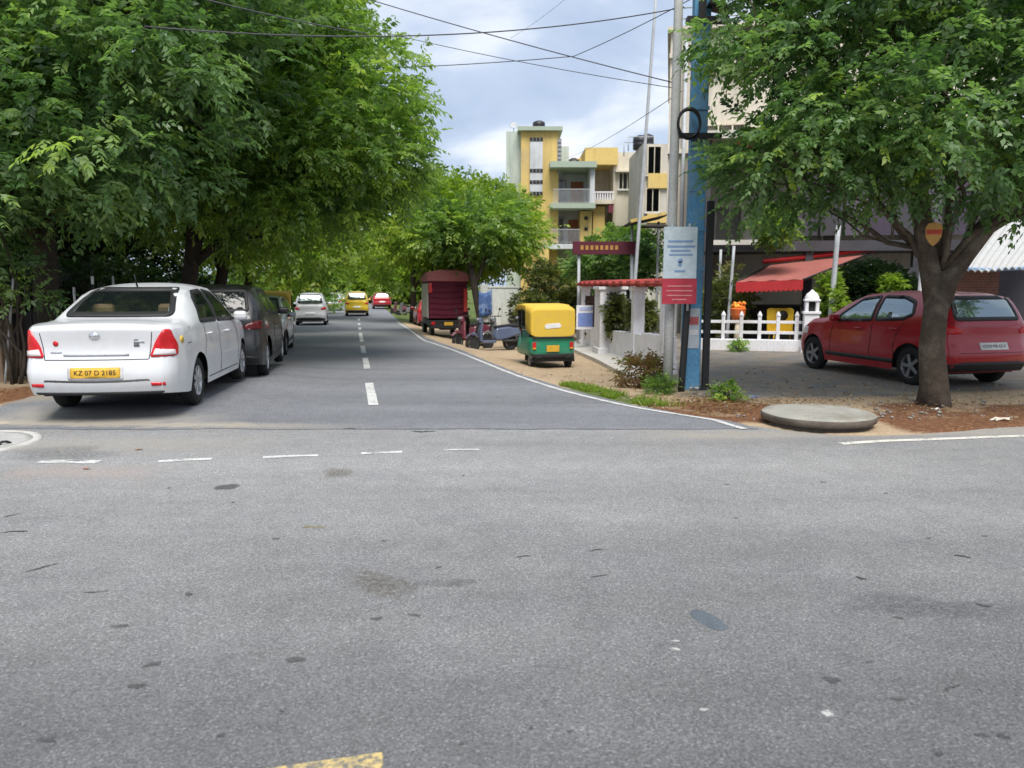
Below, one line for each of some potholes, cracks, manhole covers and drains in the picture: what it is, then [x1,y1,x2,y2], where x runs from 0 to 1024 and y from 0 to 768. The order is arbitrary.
manhole cover [0,430,43,451]
manhole cover [761,404,879,432]
